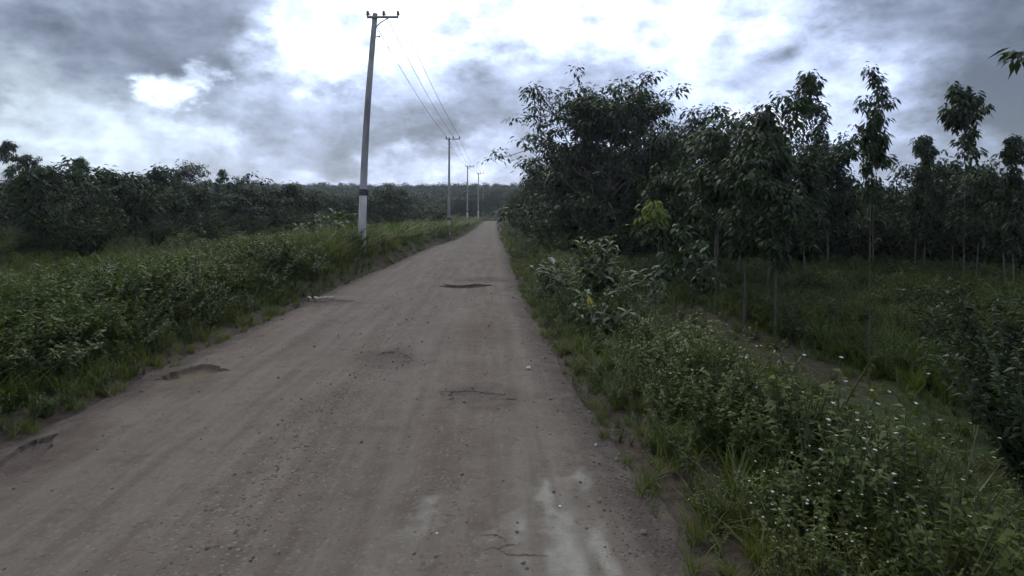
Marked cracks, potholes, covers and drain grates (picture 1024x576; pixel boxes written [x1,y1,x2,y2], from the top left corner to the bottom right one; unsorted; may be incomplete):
crack [483,534,545,556]
pothole [153,364,230,382]
pothole [438,391,516,406]
pothole [0,434,58,477]
pothole [376,350,415,365]
